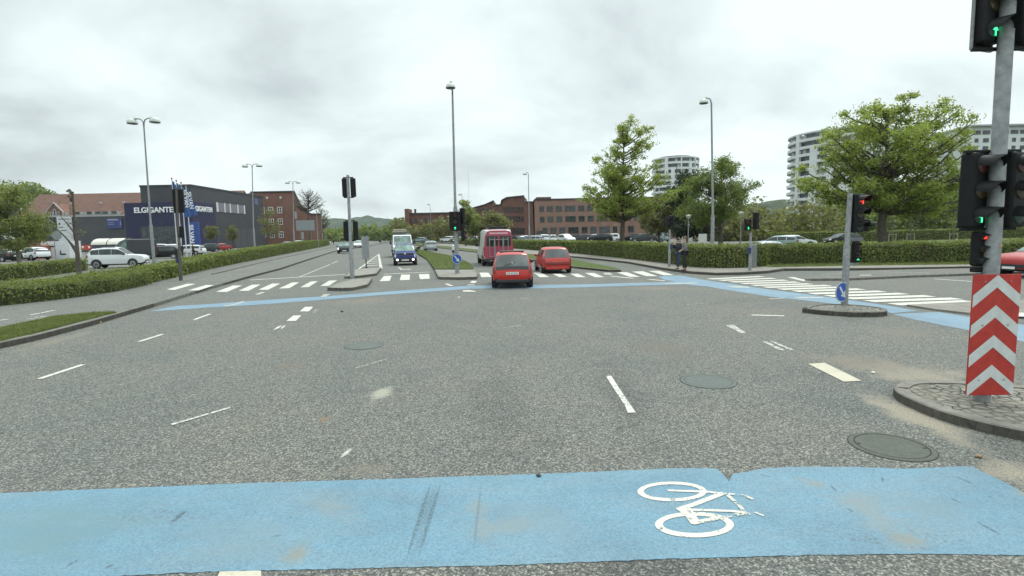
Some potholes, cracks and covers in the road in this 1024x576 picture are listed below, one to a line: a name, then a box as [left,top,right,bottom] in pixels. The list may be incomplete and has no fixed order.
manhole cover [847,432,939,462]
manhole cover [680,374,738,389]
manhole cover [344,341,384,350]
